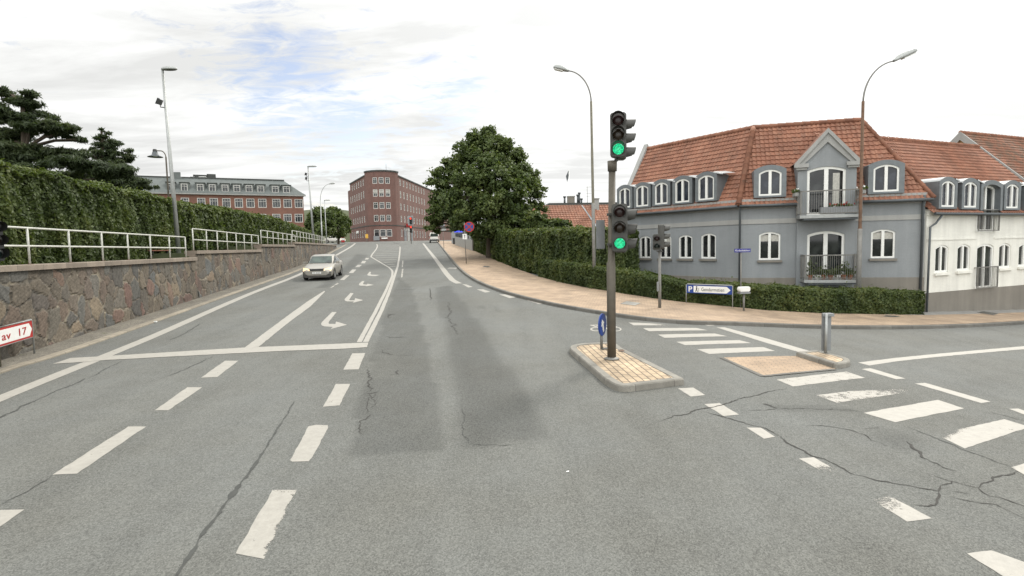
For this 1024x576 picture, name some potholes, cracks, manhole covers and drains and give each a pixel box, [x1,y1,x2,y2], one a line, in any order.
crack [358,350,399,433]
crack [664,388,786,420]
crack [708,412,1024,518]
